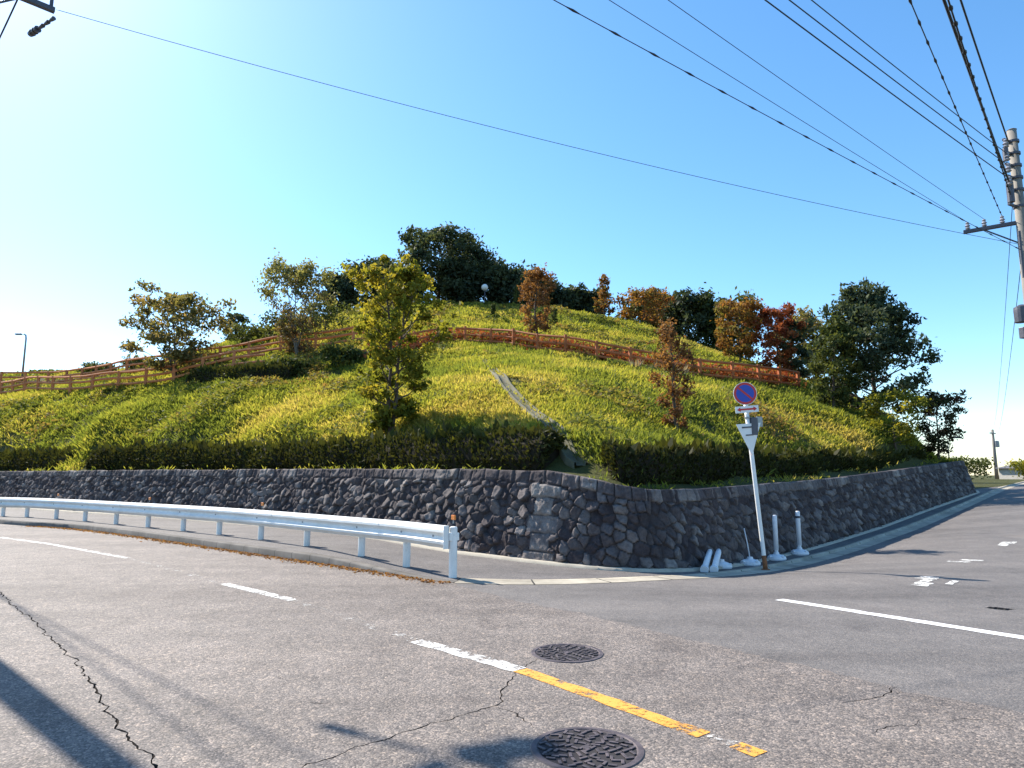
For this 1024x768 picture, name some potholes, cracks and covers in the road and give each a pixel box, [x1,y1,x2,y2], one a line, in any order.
manhole cover [530,727,645,768]
crack [301,659,537,768]
manhole cover [531,643,604,663]
crack [0,590,158,768]
